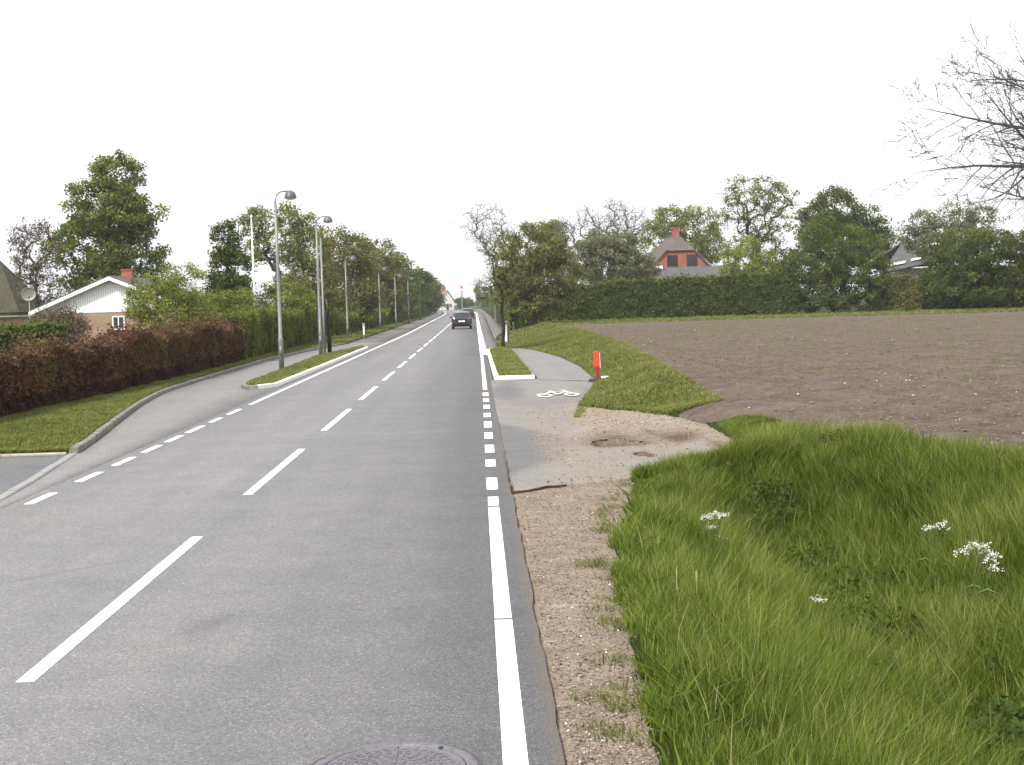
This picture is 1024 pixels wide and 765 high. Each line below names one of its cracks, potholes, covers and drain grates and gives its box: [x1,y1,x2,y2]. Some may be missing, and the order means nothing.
pothole [585,437,657,448]
crack [504,451,567,495]
manhole cover [311,741,483,765]
